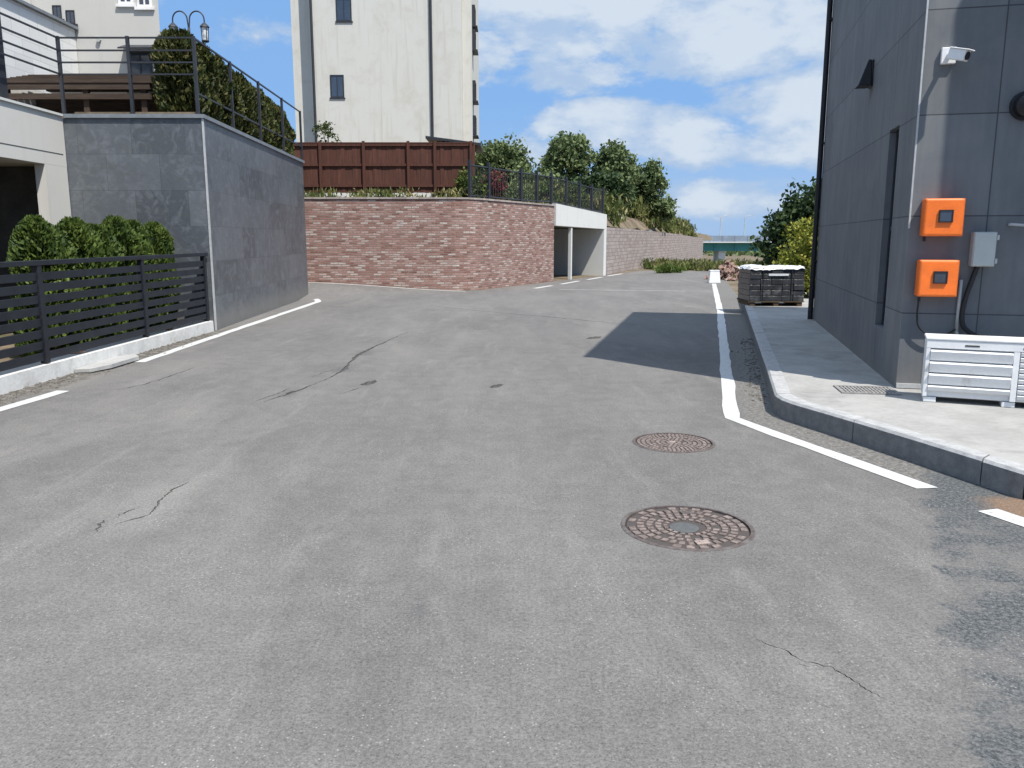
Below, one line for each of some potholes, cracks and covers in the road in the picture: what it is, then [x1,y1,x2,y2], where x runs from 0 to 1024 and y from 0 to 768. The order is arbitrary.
crack [260,334,402,401]
manhole cover [632,433,716,453]
manhole cover [621,505,755,551]
drain grate [833,385,902,395]
crack [760,640,885,699]
crack [95,482,188,532]
